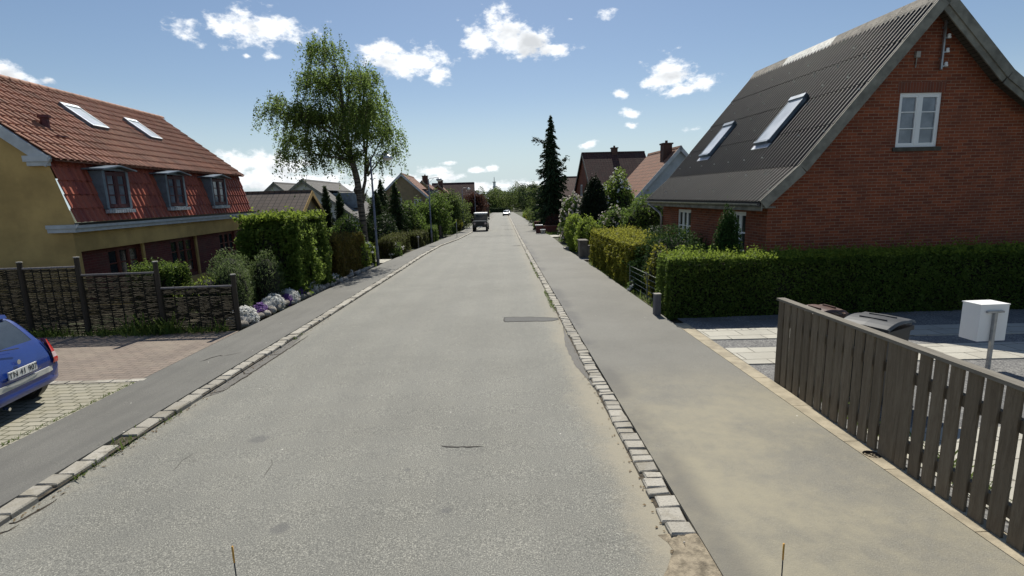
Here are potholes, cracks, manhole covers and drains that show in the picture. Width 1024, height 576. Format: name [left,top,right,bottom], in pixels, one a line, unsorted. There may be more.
crack [203,337,306,393]
